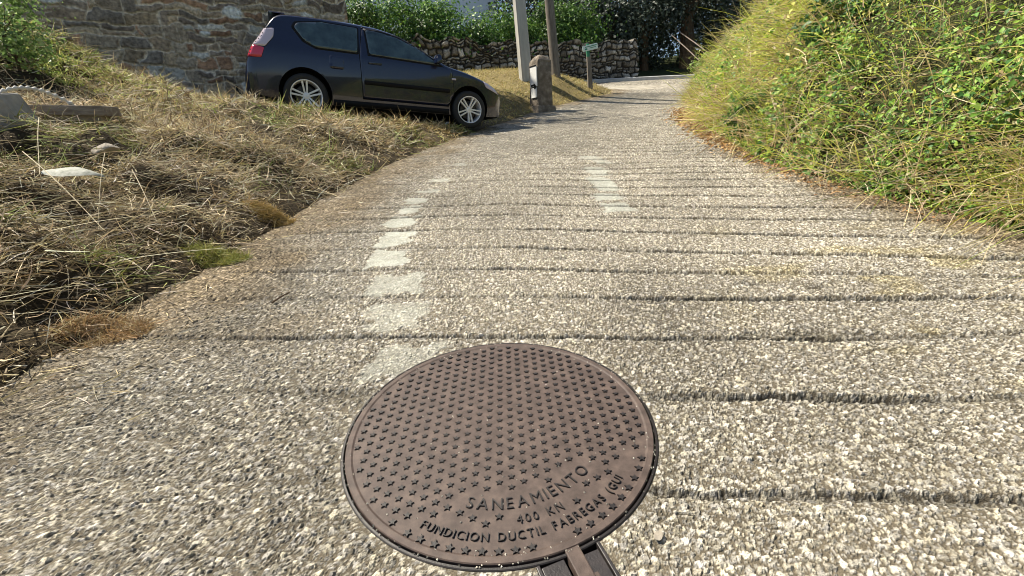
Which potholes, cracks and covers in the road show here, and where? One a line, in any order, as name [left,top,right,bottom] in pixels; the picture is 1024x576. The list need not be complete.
manhole cover [340,343,659,576]
